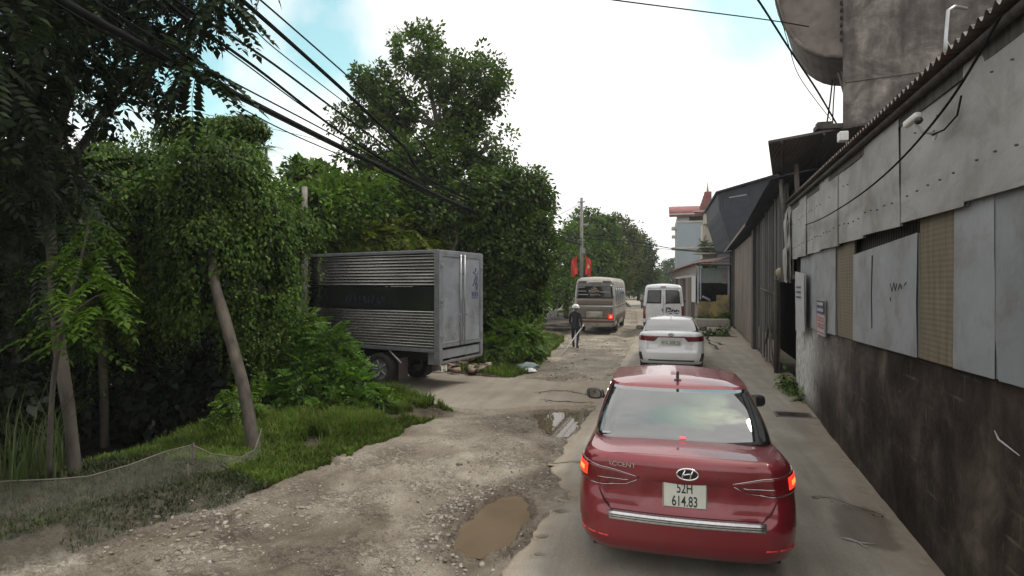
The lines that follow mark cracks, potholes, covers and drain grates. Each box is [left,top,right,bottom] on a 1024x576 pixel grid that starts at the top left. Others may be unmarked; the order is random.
pothole [530,410,591,439]
crack [817,497,883,517]
pothole [447,491,540,564]
crack [539,390,590,404]
